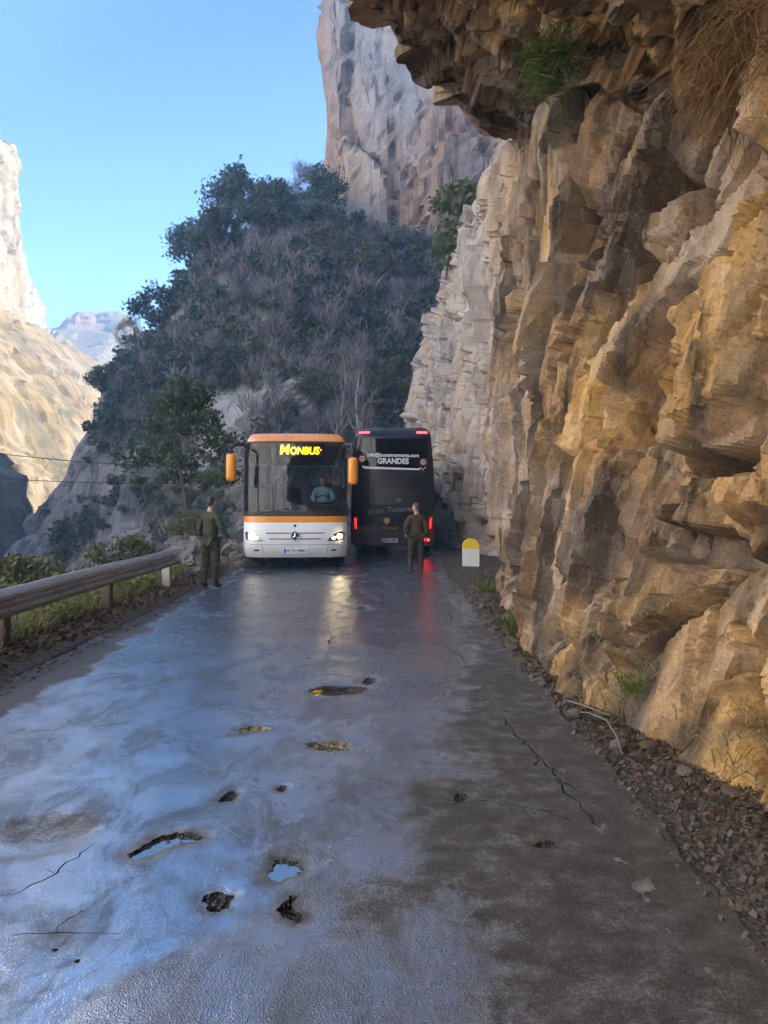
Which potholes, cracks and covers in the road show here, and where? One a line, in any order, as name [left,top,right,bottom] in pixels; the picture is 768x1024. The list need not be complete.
crack [444,716,600,828]
pothole [533,841,559,849]
pothole [308,685,368,696]
pothole [219,791,238,802]
crack [13,908,121,935]
pothole [266,859,305,883]
crack [0,848,88,897]
pothole [201,892,234,912]
pothole [127,832,206,860]
pothole [305,741,357,752]
pothole [276,895,303,925]
